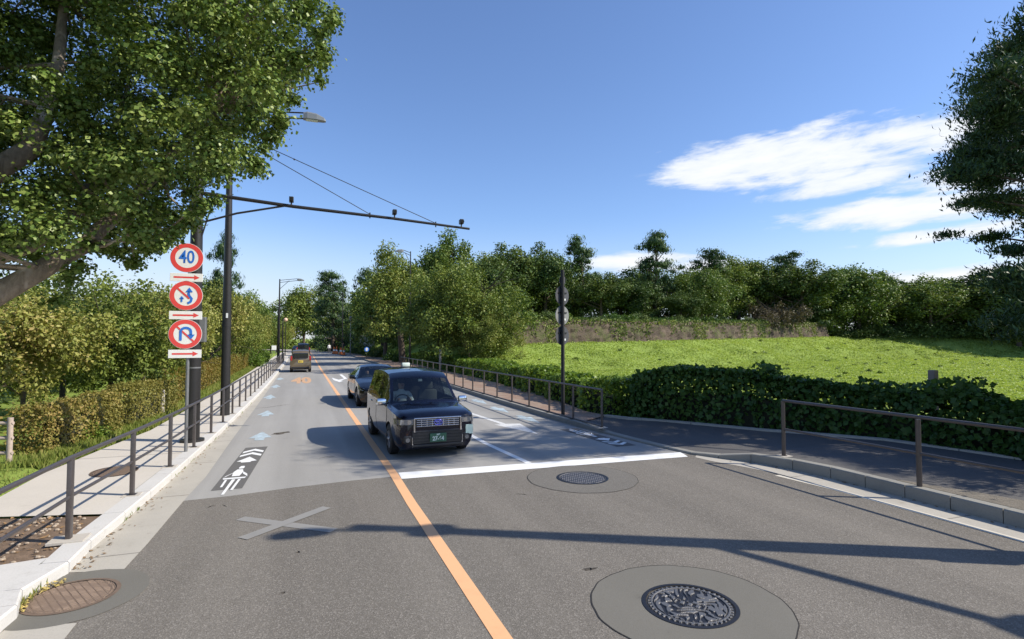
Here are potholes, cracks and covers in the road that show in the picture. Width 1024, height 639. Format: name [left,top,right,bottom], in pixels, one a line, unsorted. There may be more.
manhole cover [527,465,639,493]
manhole cover [89,466,139,477]
manhole cover [3,569,150,631]
manhole cover [591,565,800,639]
